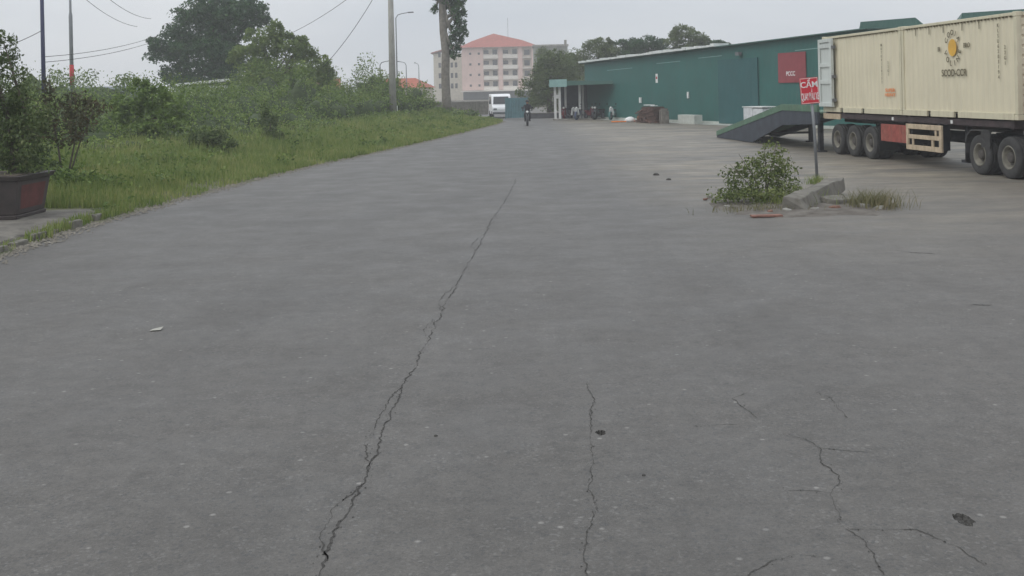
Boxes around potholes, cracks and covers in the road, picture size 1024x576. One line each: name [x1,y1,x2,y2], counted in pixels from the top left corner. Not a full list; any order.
pothole [952,513,975,527]
crack [579,385,598,576]
crack [312,179,516,576]
crack [783,436,987,574]
